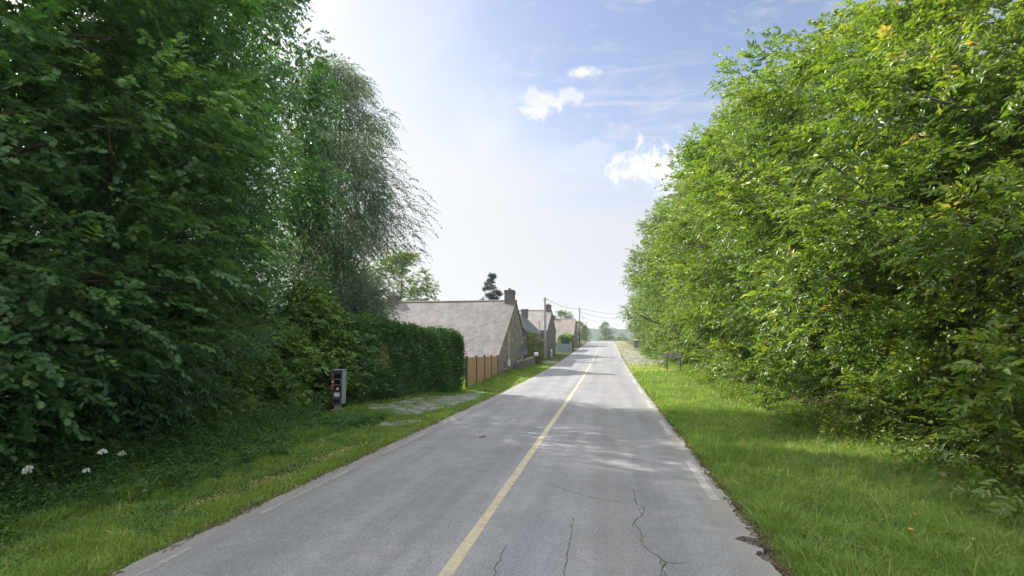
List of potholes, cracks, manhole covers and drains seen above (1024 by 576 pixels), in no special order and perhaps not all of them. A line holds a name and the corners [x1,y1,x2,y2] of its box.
crack [554,486,684,576]
pothole [735,536,767,552]
